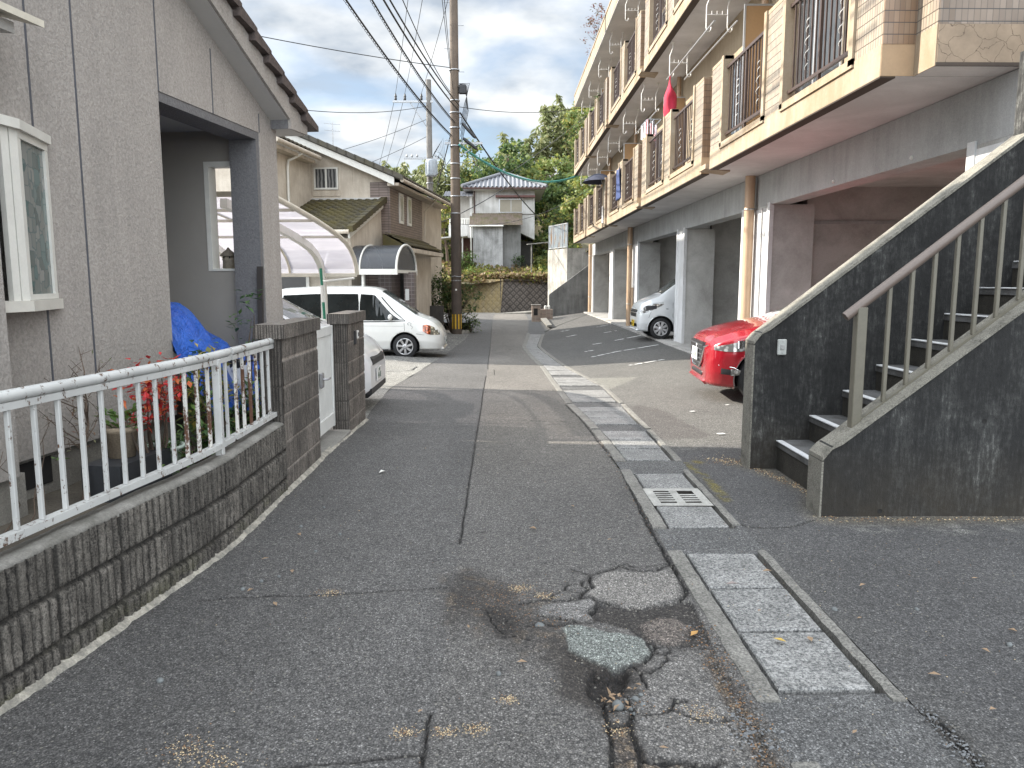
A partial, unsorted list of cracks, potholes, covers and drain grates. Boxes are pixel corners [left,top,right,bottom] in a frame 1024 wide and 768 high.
pothole [568,656,624,709]
drain grate [643,488,714,511]
crack [914,705,987,768]
crack [486,406,778,768]
crack [280,713,433,768]
crack [199,587,451,602]
